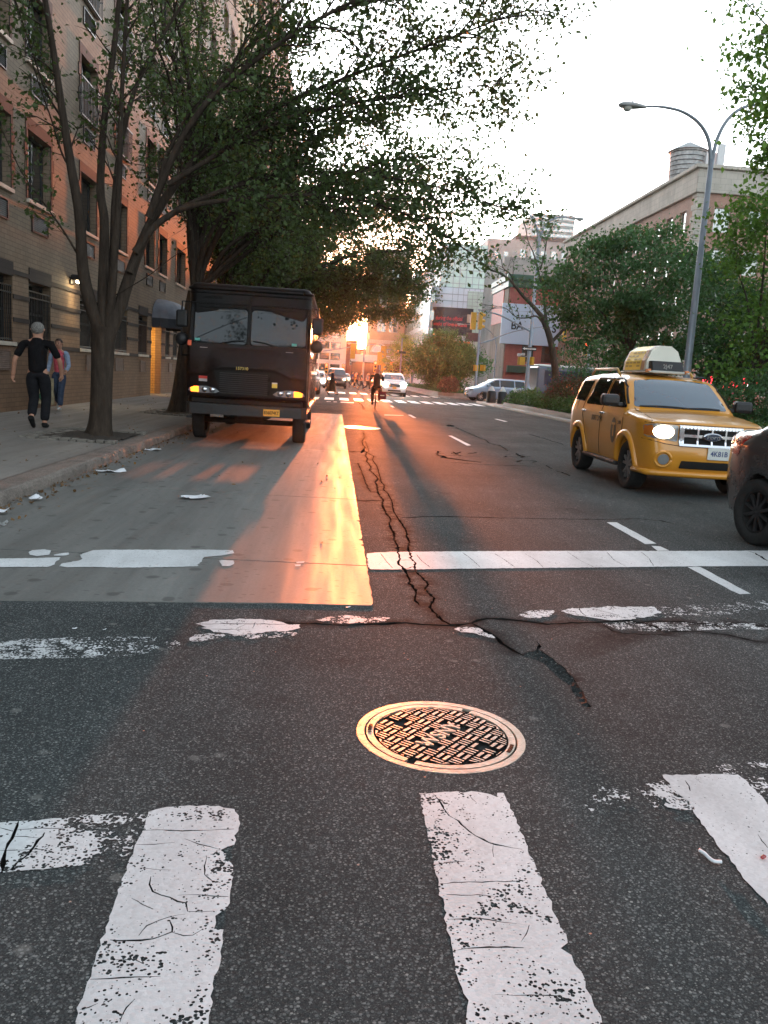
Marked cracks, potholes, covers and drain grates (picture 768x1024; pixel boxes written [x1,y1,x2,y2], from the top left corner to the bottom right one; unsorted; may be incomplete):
manhole cover [356,701,526,774]
crack [0,822,64,873]
crack [284,433,768,655]
